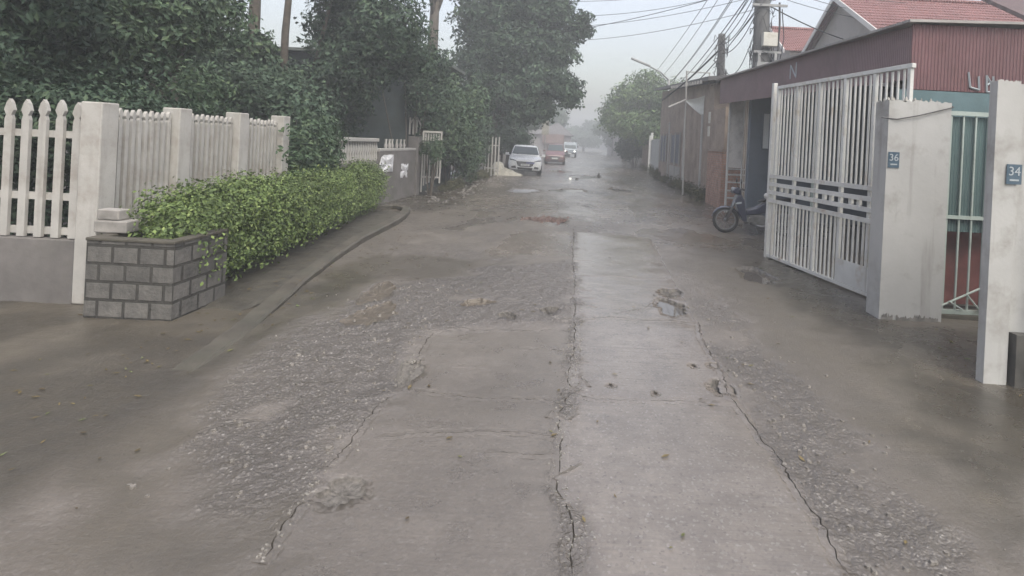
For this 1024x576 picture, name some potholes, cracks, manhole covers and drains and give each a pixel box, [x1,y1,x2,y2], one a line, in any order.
pothole [354,281,401,307]
pothole [456,297,500,308]
pothole [652,297,690,318]
pothole [535,306,563,316]
pothole [705,378,741,398]
pothole [307,473,373,512]
pothole [519,216,569,224]
pothole [655,288,685,299]
pothole [736,266,779,285]
pothole [333,300,402,328]
crack [251,493,323,565]
crack [288,196,858,576]
